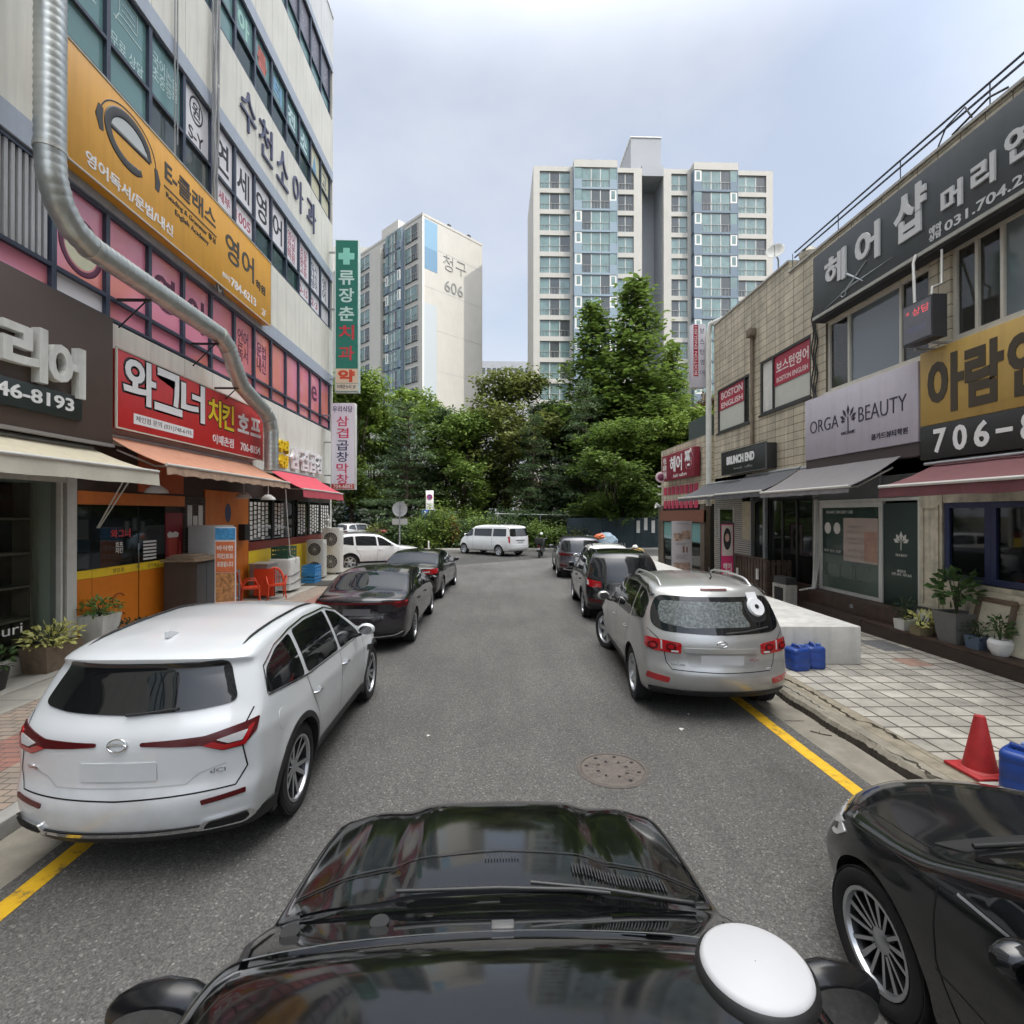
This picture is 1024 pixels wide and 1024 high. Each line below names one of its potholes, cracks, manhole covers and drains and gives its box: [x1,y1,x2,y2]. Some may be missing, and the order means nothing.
manhole cover [576,753,649,789]
